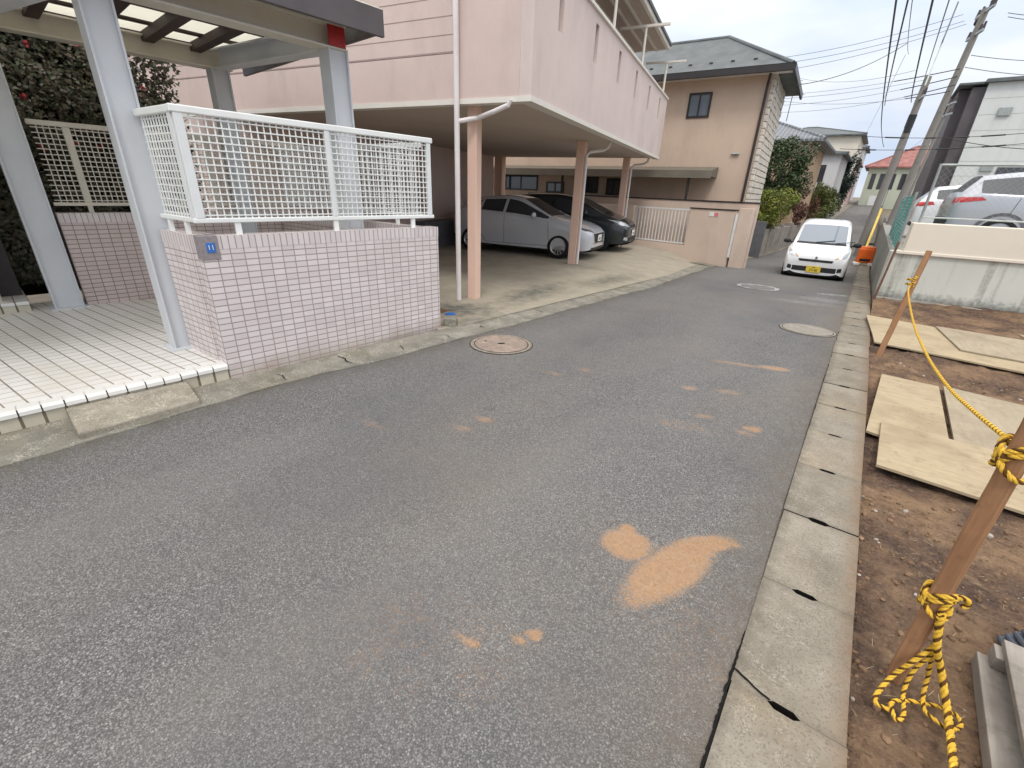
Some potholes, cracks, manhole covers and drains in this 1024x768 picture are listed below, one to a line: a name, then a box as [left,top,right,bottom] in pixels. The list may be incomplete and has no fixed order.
manhole cover [469,334,533,355]
manhole cover [779,323,837,337]
